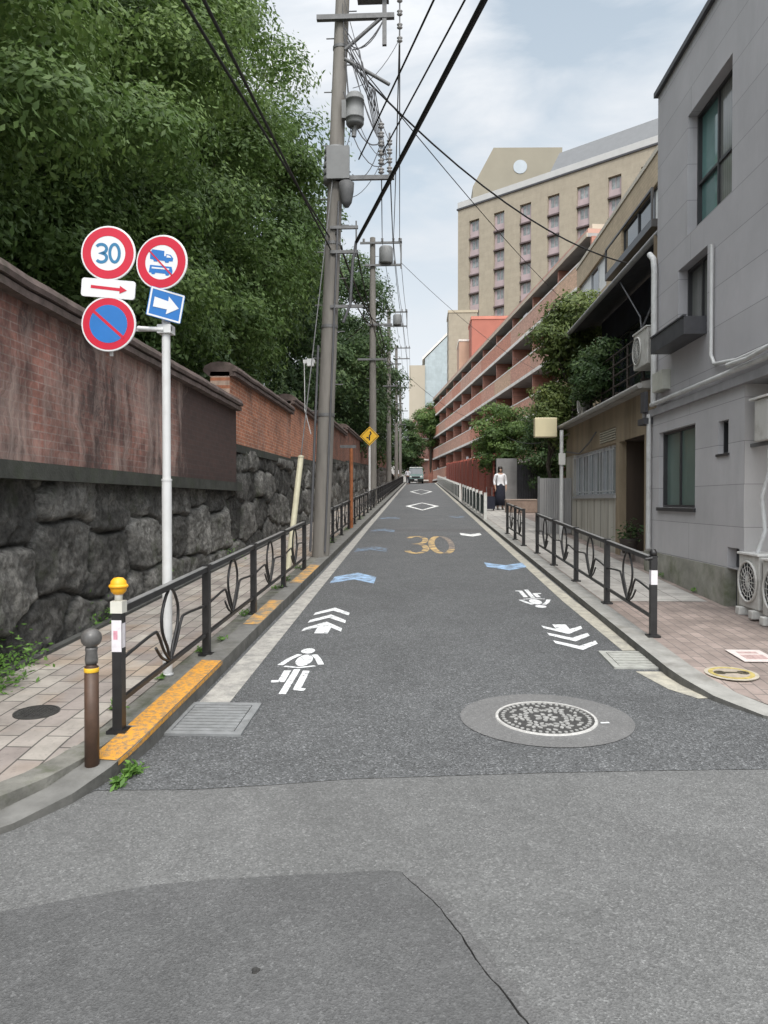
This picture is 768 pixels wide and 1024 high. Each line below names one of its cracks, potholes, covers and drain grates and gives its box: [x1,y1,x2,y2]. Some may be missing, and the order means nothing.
utility cover [704,666,759,681]
manhole cover [495,701,598,736]
manhole cover [12,705,60,720]
